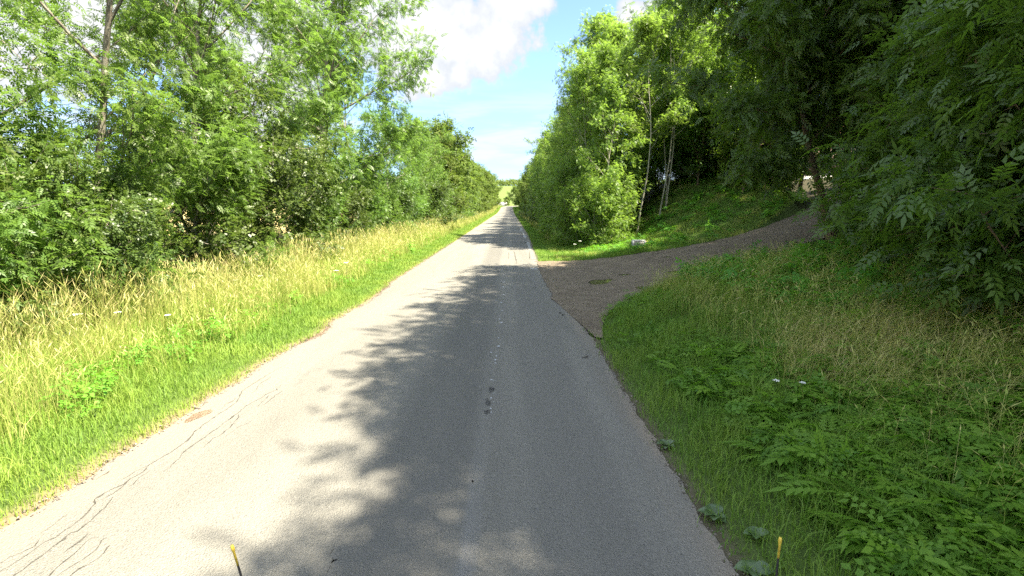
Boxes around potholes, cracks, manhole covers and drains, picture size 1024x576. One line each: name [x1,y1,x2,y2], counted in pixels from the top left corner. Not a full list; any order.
crack [0,367,281,576]
